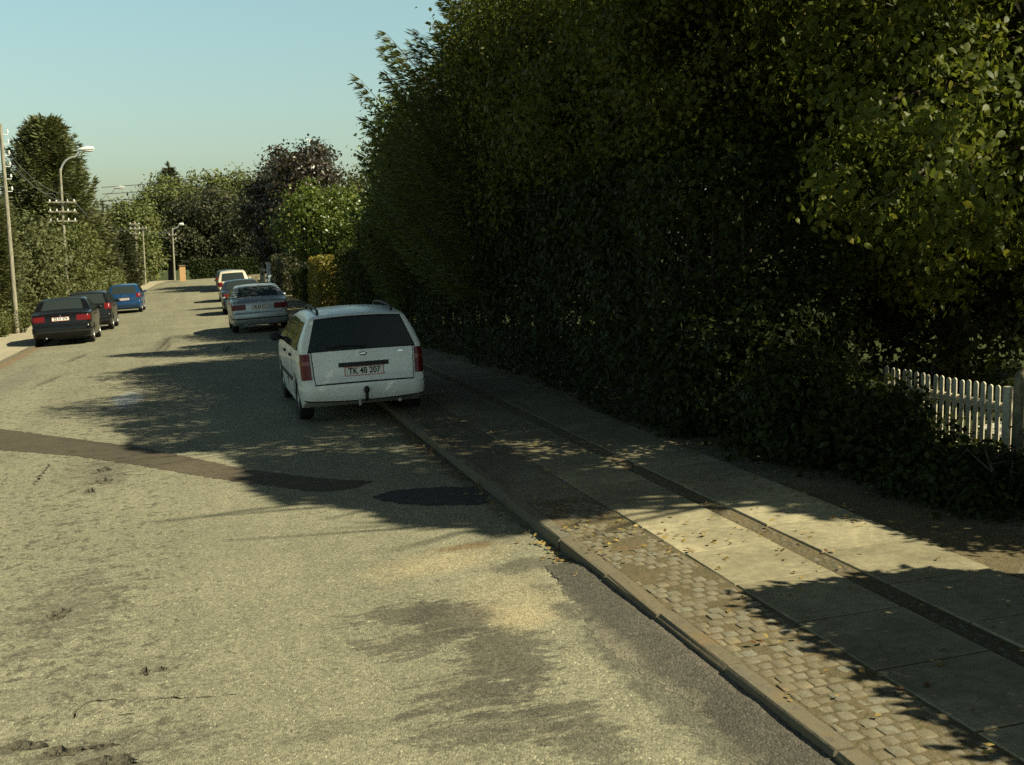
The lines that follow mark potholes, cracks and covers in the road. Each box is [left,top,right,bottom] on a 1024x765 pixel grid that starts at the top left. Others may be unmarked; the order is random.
pothole [29,745,98,760]
crack [33,464,72,494]
pothole [83,743,121,753]
crack [72,699,134,719]
pothole [44,608,73,621]
pothole [75,753,139,765]
pothole [0,740,49,752]
